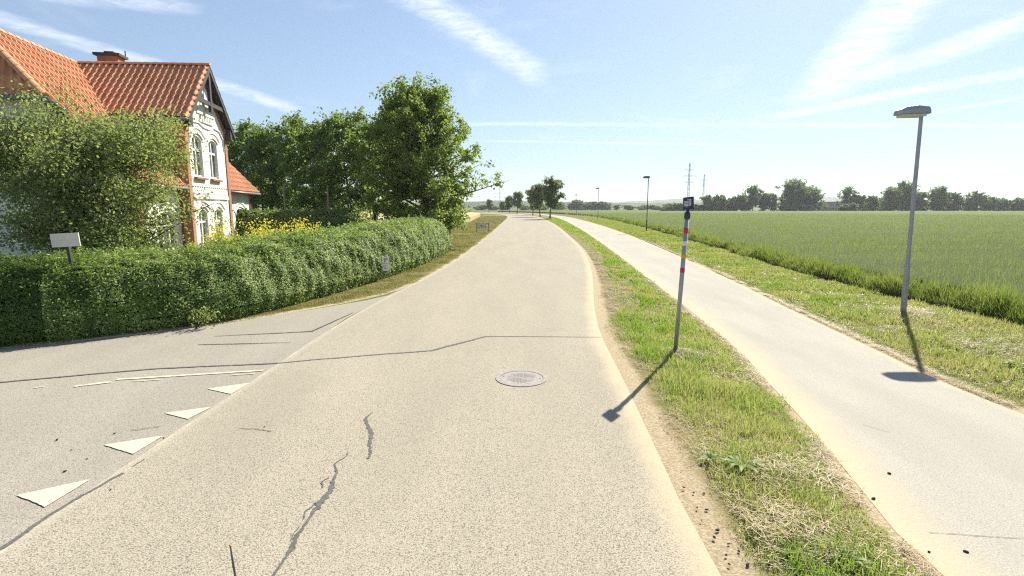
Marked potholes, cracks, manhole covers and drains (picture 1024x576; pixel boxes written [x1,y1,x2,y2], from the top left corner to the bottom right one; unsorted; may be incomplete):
manhole cover [496,370,547,387]
